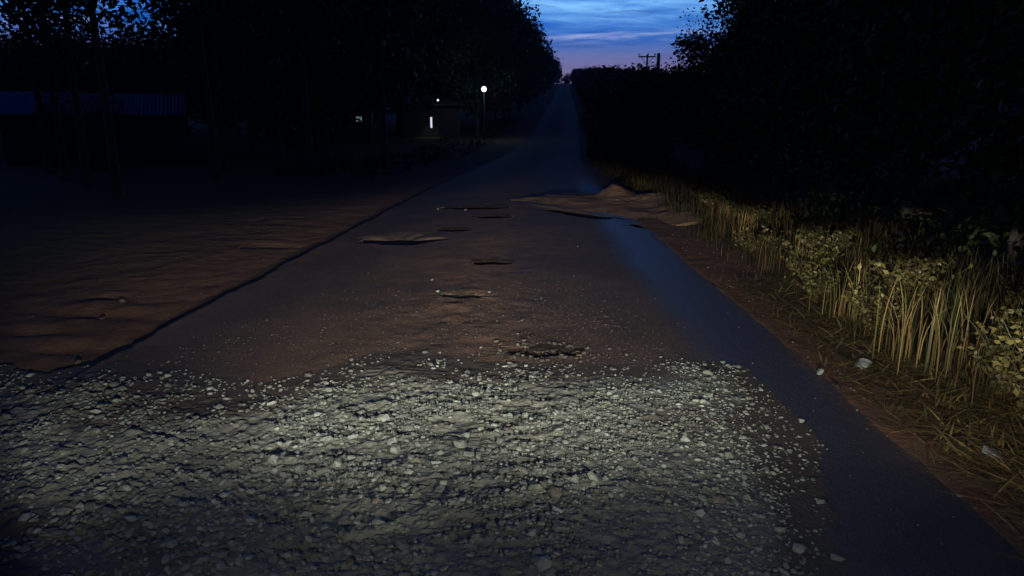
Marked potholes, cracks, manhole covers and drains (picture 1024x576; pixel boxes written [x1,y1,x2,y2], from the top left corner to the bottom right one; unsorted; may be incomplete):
pothole [461,257,528,267]
pothole [351,229,461,247]
pothole [476,339,613,362]
pothole [423,287,497,302]
